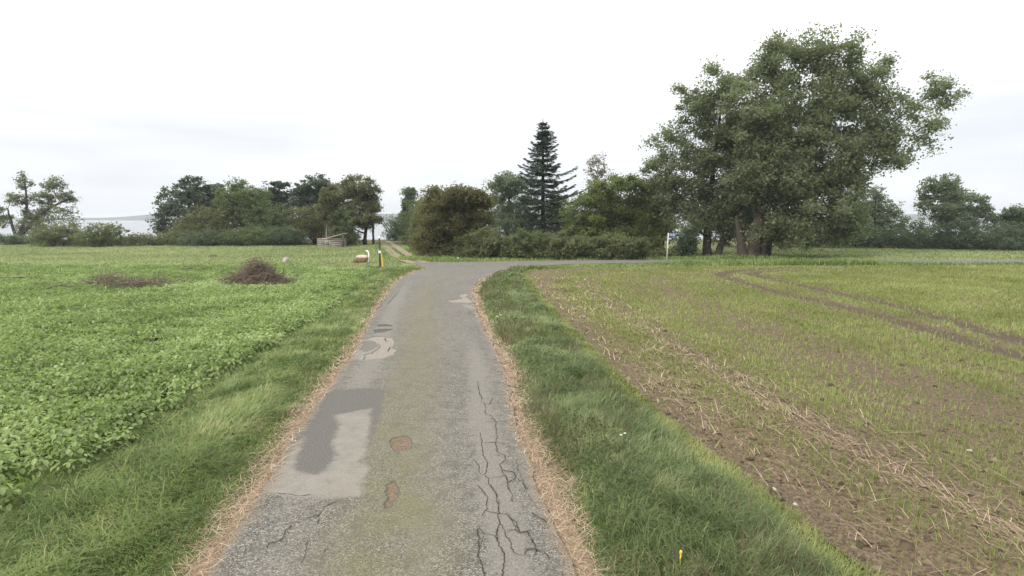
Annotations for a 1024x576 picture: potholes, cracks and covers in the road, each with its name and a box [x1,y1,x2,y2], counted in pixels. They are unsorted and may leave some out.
crack [473,381,550,576]
crack [265,493,337,561]
